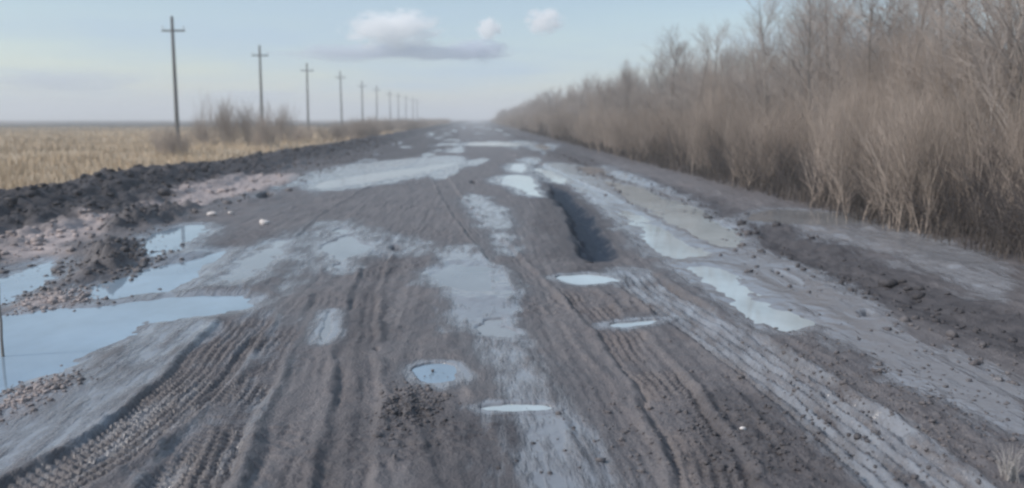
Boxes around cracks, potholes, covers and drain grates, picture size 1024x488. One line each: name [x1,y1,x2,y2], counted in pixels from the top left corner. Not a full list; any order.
pothole [399,359,474,389]
